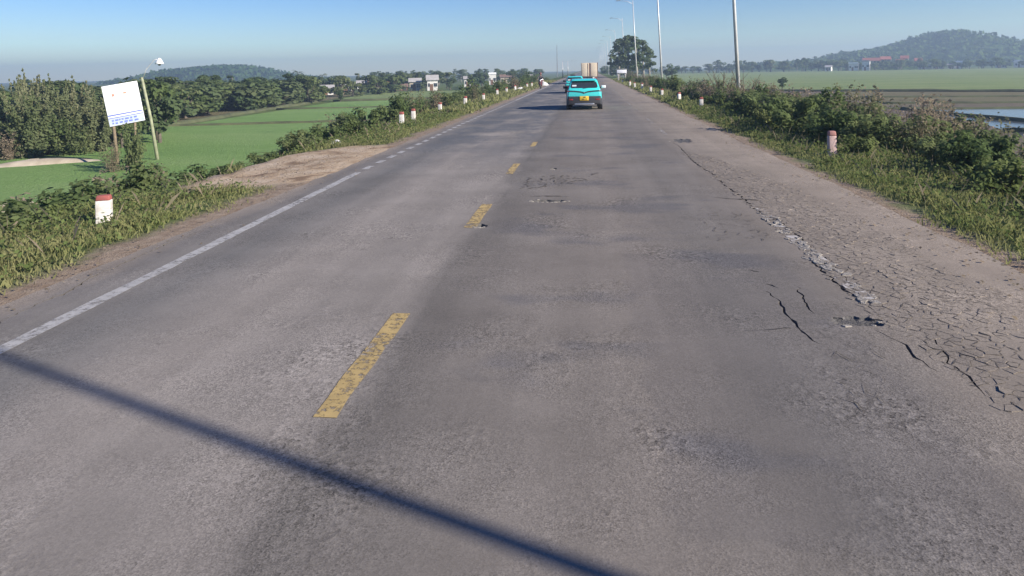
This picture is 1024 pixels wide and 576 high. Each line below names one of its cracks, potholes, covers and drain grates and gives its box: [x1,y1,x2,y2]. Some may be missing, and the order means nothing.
pothole [830,316,887,328]
crack [674,143,1024,412]
